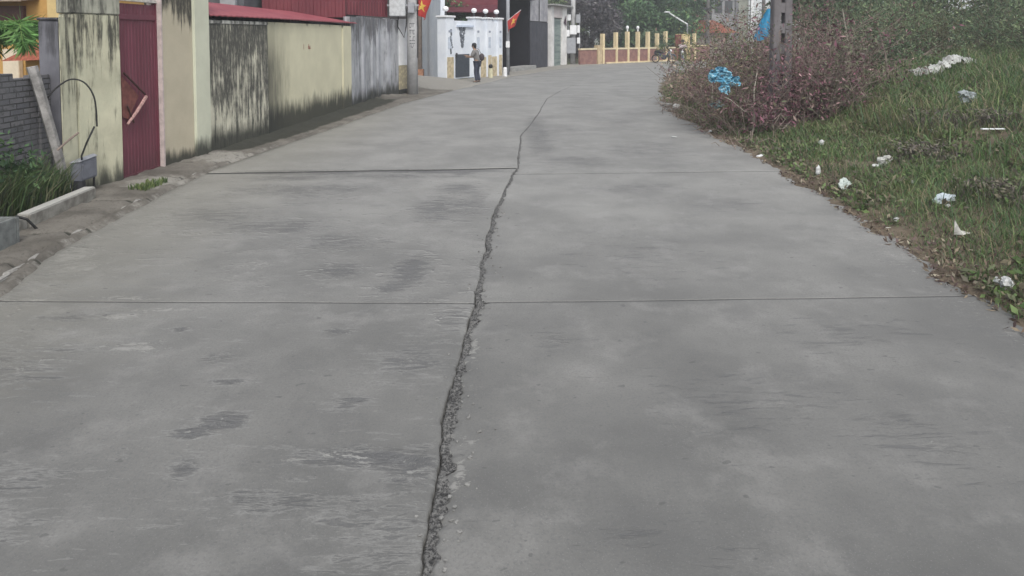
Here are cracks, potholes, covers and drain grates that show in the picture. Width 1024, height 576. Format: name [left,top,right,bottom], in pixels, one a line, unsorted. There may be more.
crack [406,87,569,576]
